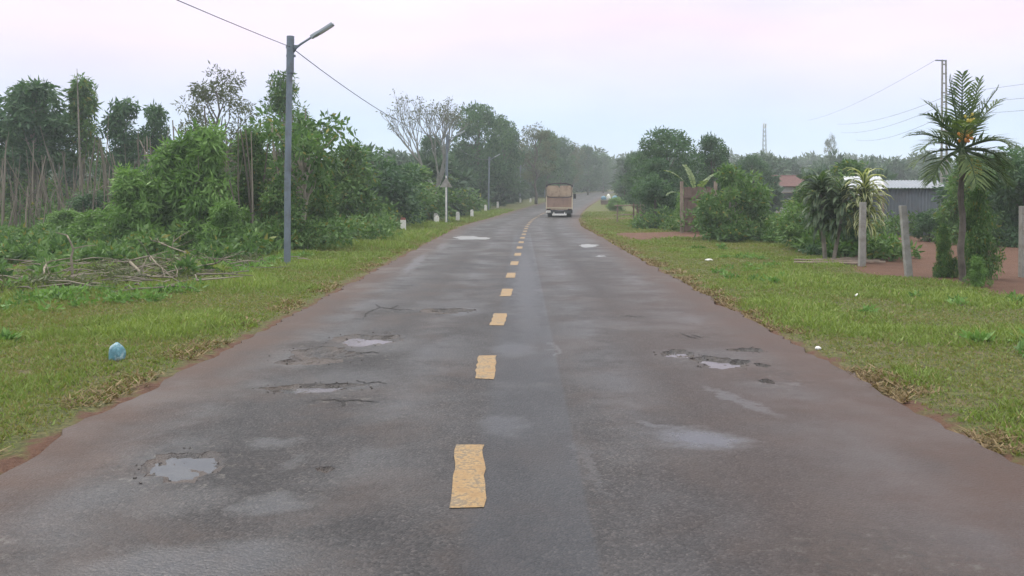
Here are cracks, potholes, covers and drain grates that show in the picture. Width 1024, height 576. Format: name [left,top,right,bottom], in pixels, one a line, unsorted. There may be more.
pothole [267,346,367,365]
pothole [133,447,228,484]
pothole [653,349,700,358]
pothole [325,332,405,348]
pothole [689,355,760,369]
pothole [252,381,373,394]
